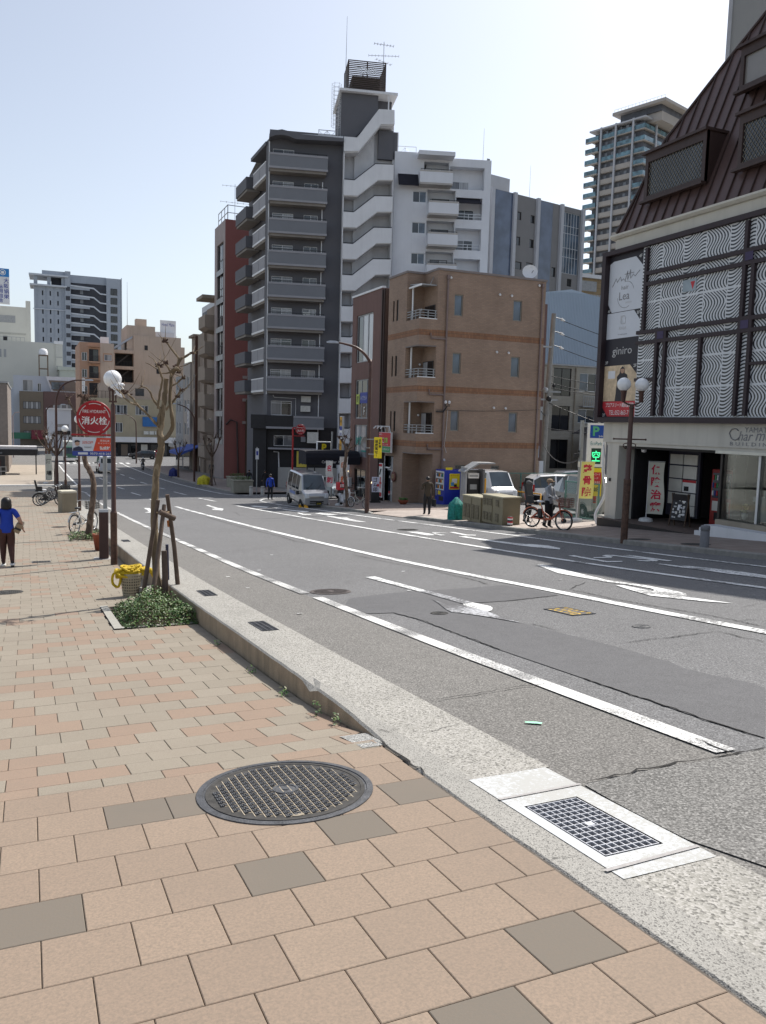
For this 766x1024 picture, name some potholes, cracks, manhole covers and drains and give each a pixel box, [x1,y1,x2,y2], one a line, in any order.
drain grate [524,797,663,878]
drain grate [248,621,279,631]
crack [565,582,765,642]
manhole cover [544,607,596,616]
manhole cover [196,760,373,826]
crack [583,678,765,783]
